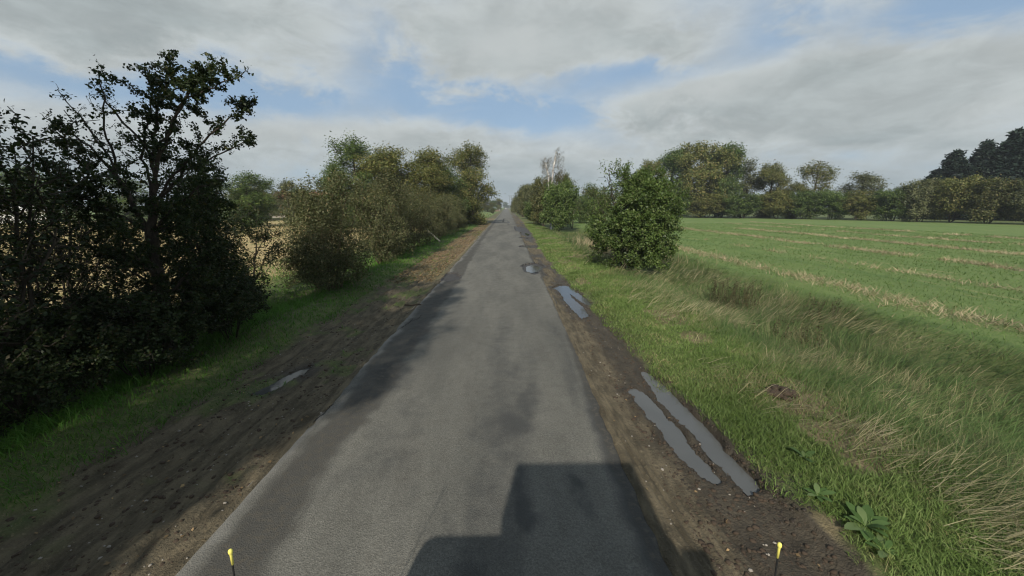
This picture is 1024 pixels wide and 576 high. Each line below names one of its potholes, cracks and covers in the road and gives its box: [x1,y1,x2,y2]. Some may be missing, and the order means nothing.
pothole [520,262,546,275]
